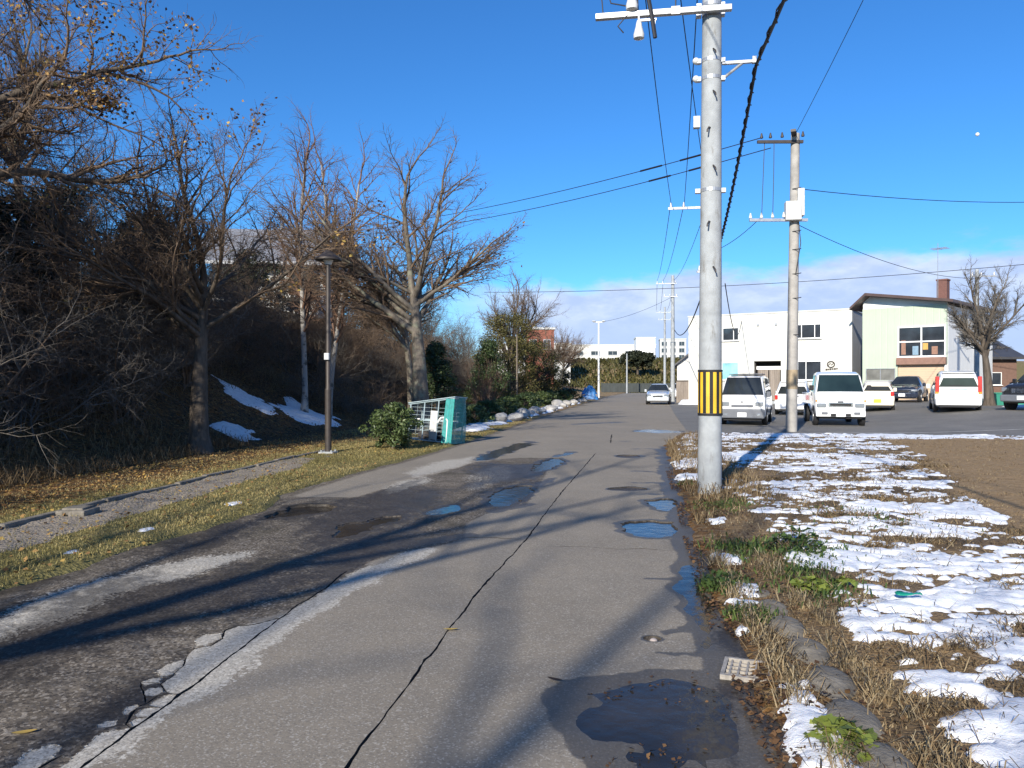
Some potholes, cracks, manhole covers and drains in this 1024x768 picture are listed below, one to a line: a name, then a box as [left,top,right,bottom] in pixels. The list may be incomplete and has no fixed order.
drain grate [720,656,773,683]
pothole [331,516,402,538]
crack [38,571,347,768]
pothole [264,504,337,519]
